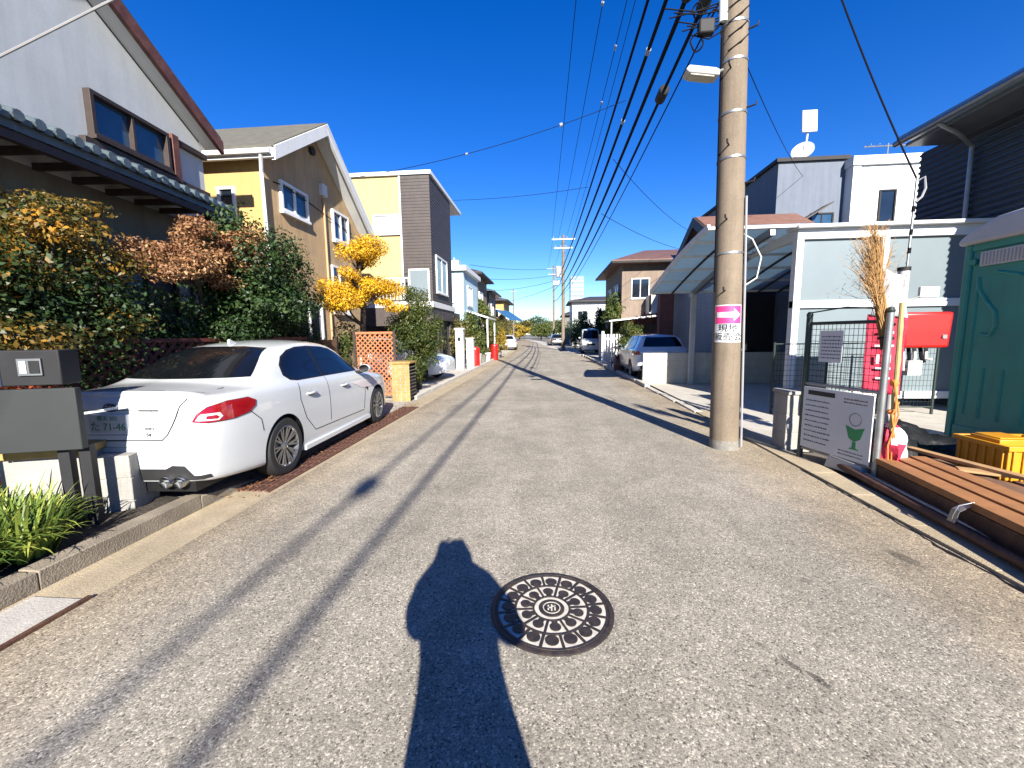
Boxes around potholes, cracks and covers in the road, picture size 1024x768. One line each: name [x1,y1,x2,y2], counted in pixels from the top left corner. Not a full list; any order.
manhole cover [491,573,615,657]
